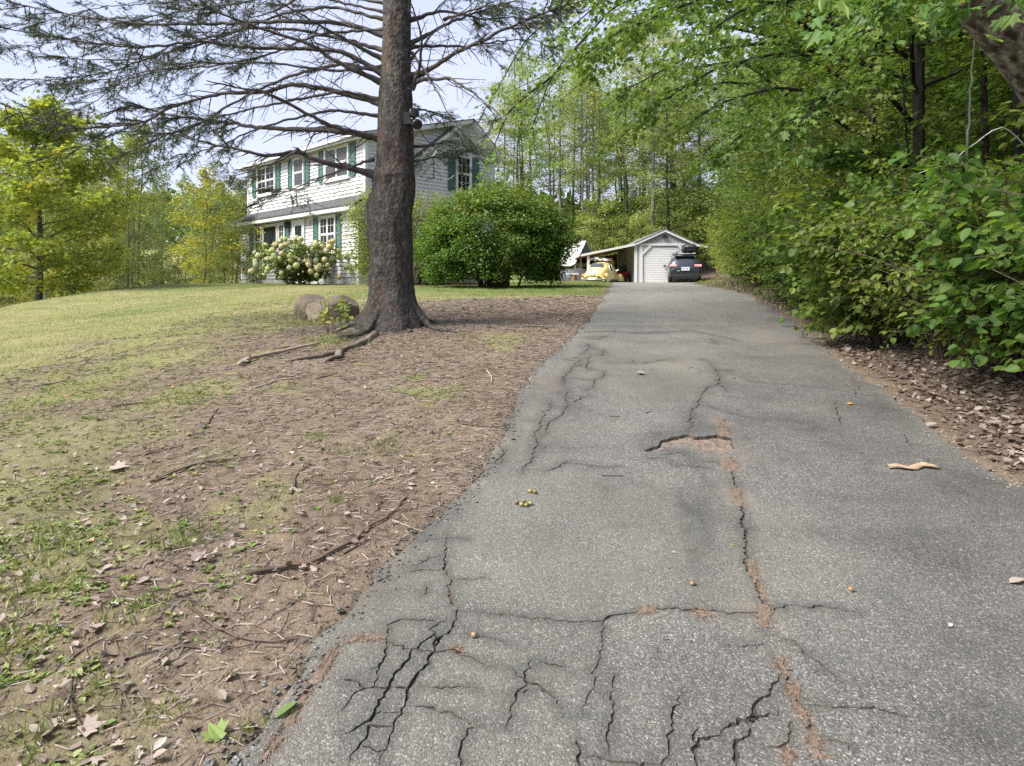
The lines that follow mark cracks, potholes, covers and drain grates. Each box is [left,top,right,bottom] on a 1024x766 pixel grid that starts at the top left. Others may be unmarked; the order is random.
crack [344,538,846,766]
crack [522,344,660,470]
pothole [644,435,734,454]
crack [689,363,750,424]
